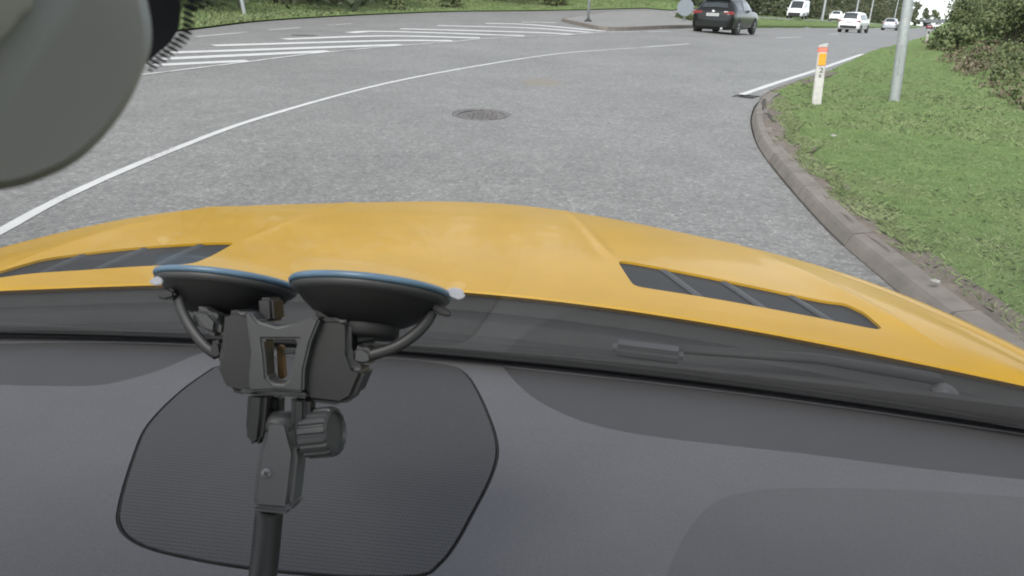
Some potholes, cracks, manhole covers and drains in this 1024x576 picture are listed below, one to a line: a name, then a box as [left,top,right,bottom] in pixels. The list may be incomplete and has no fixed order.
manhole cover [452,108,511,120]
